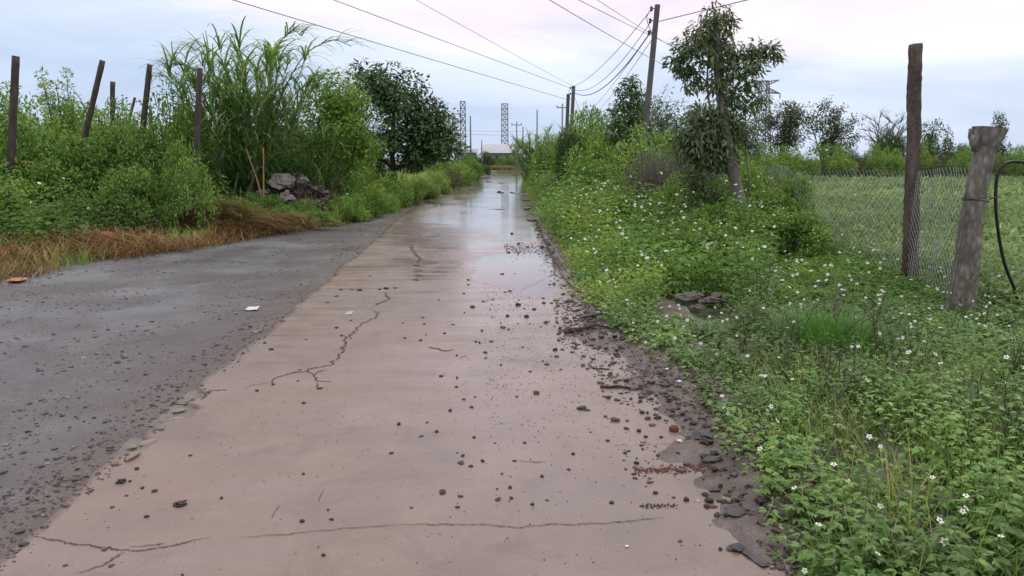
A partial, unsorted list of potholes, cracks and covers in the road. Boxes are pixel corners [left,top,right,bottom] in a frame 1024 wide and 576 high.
crack [402,518,651,528]
crack [36,536,210,572]
crack [245,292,391,388]
crack [409,244,425,281]
